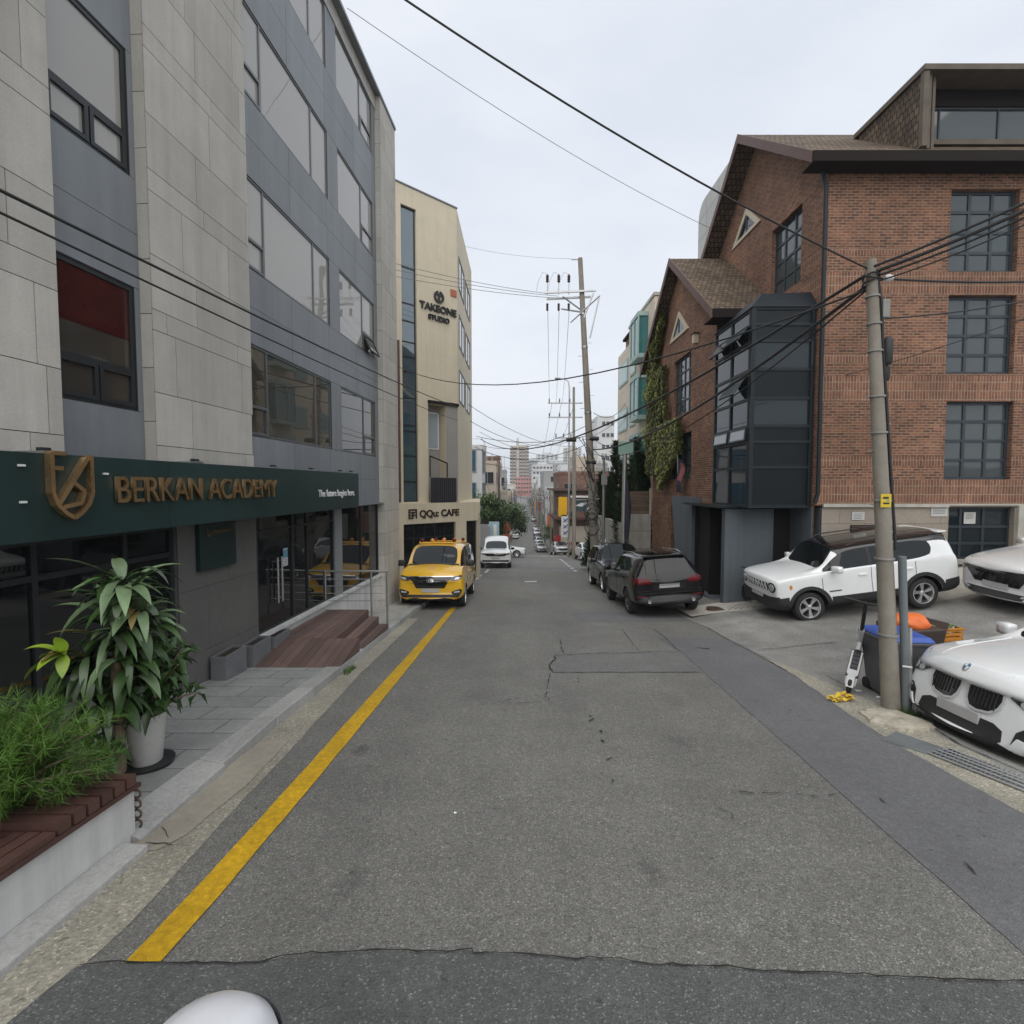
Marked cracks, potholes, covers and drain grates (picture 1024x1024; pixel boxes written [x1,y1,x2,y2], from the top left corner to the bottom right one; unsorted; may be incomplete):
crack [492,627,699,703]
drain grate [927,747,1024,792]
